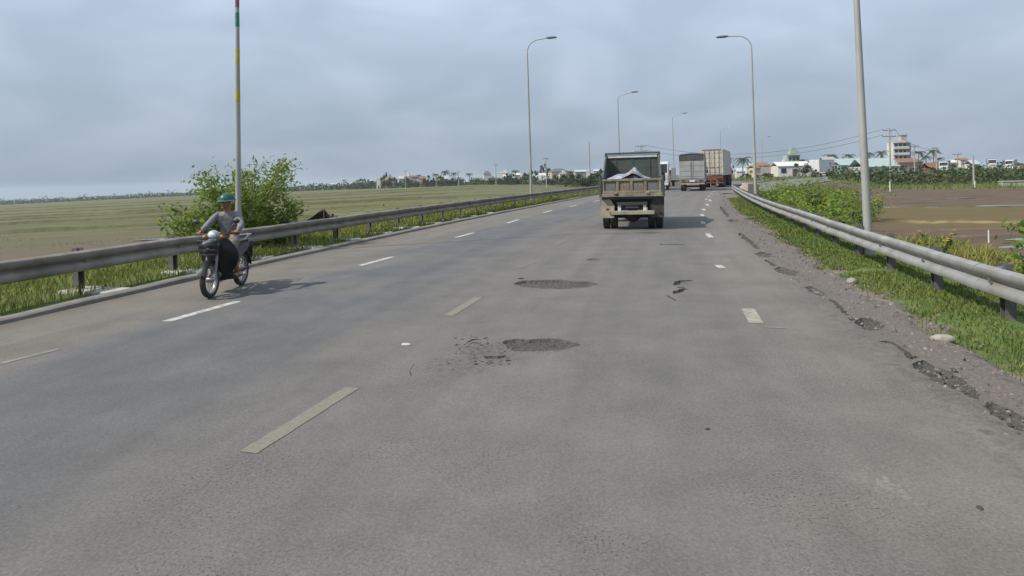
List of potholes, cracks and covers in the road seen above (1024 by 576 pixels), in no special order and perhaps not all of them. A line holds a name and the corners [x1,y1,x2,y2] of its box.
pothole [483,338,581,352]
pothole [984,401,1024,432]
crack [667,280,693,301]
pothole [512,278,598,290]
pothole [773,267,800,277]
pothole [473,354,511,365]
crack [880,341,914,359]
pothole [910,356,987,404]
pothole [848,317,890,331]
crack [829,299,849,315]
